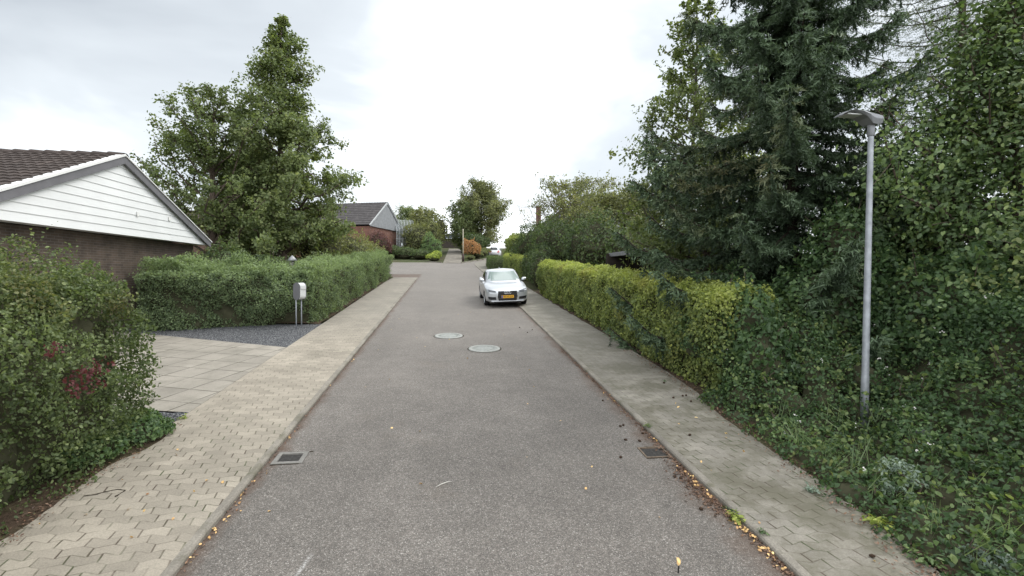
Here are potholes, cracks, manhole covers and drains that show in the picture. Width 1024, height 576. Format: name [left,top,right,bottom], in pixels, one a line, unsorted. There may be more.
manhole cover [467,345,501,353]
drain grate [637,446,671,459]
drain grate [270,451,313,466]
